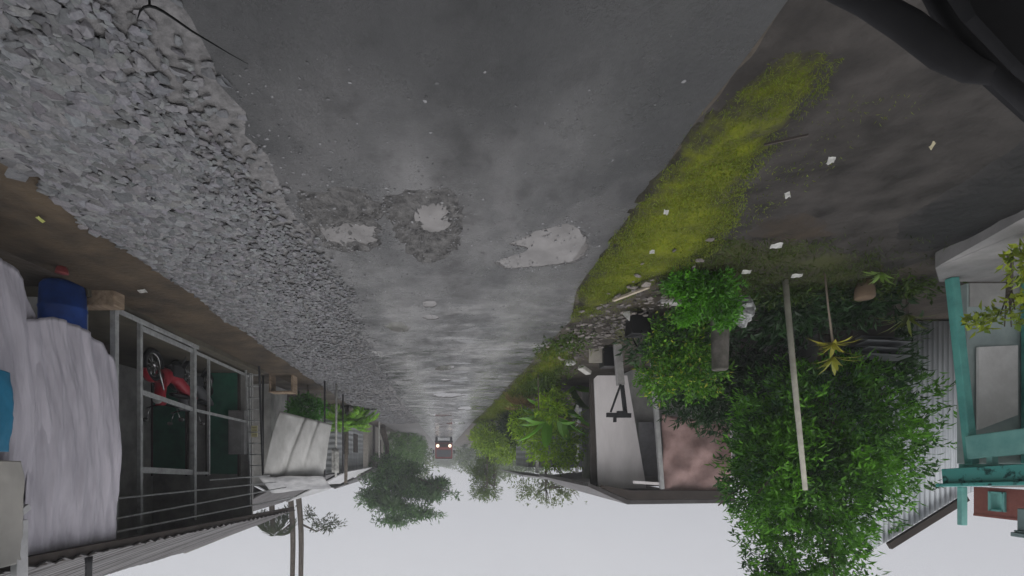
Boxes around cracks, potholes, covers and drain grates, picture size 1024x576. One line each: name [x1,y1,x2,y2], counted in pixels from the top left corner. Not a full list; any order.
pothole [297,186,387,253]
pothole [382,188,464,264]
